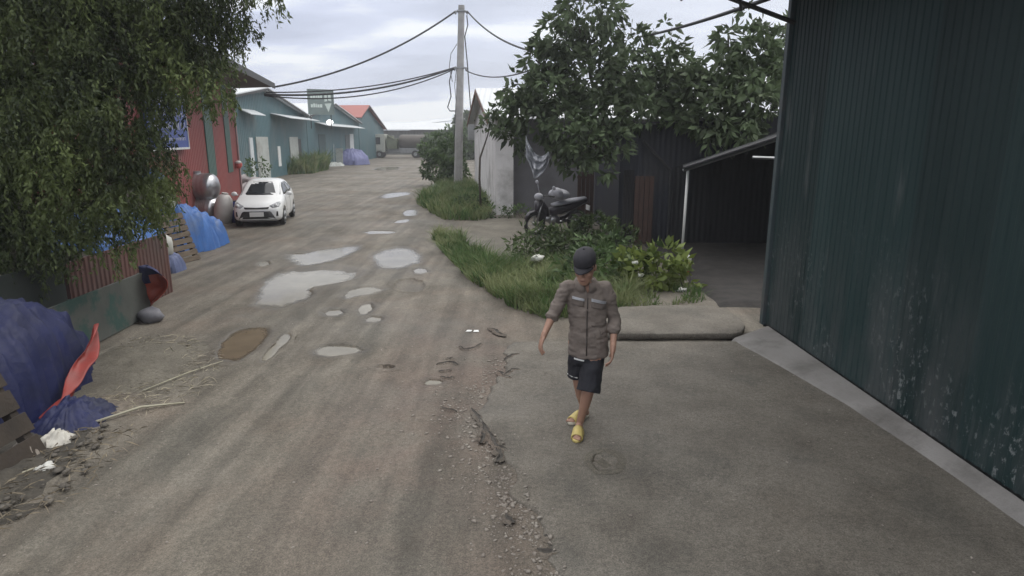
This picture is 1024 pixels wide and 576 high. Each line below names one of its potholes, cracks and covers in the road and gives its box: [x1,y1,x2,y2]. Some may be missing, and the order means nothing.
pothole [375,191,413,199]
pothole [363,245,430,271]
pothole [254,327,297,367]
pothole [299,340,377,361]
pothole [244,263,371,312]
crack [440,407,507,463]
pothole [277,244,366,267]
pothole [334,284,392,301]
crack [437,328,520,380]
pothole [203,322,279,367]
pothole [368,362,404,372]
